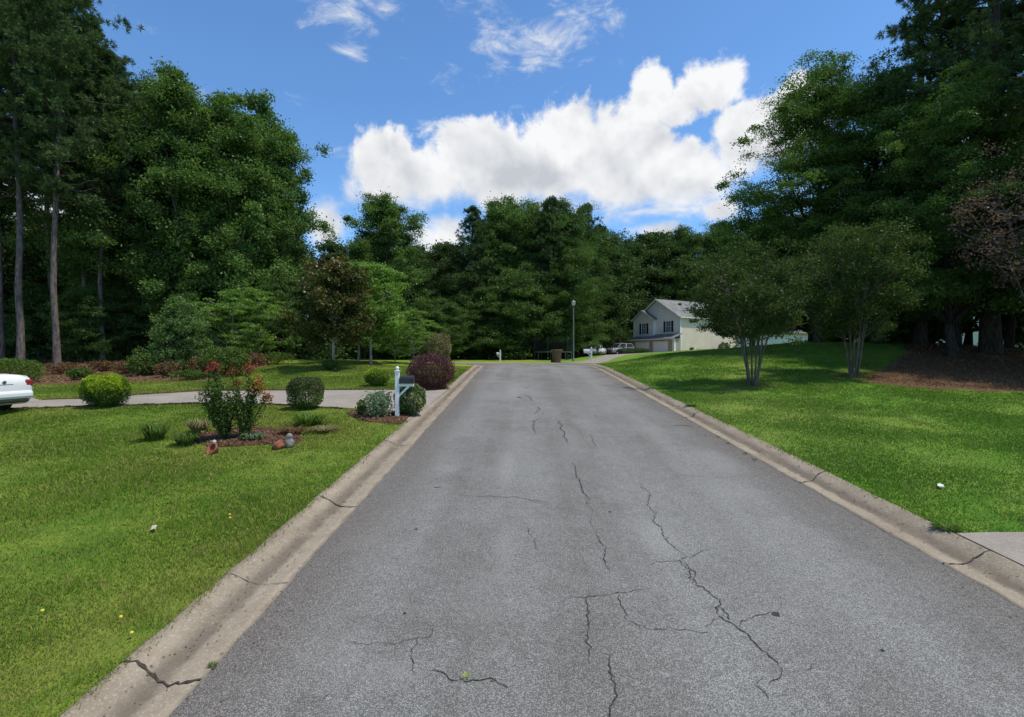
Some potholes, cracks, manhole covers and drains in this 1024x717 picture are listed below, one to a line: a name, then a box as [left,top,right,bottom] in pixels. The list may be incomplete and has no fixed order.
crack [562,466,611,572]
crack [345,626,508,687]
crack [566,485,813,717]
